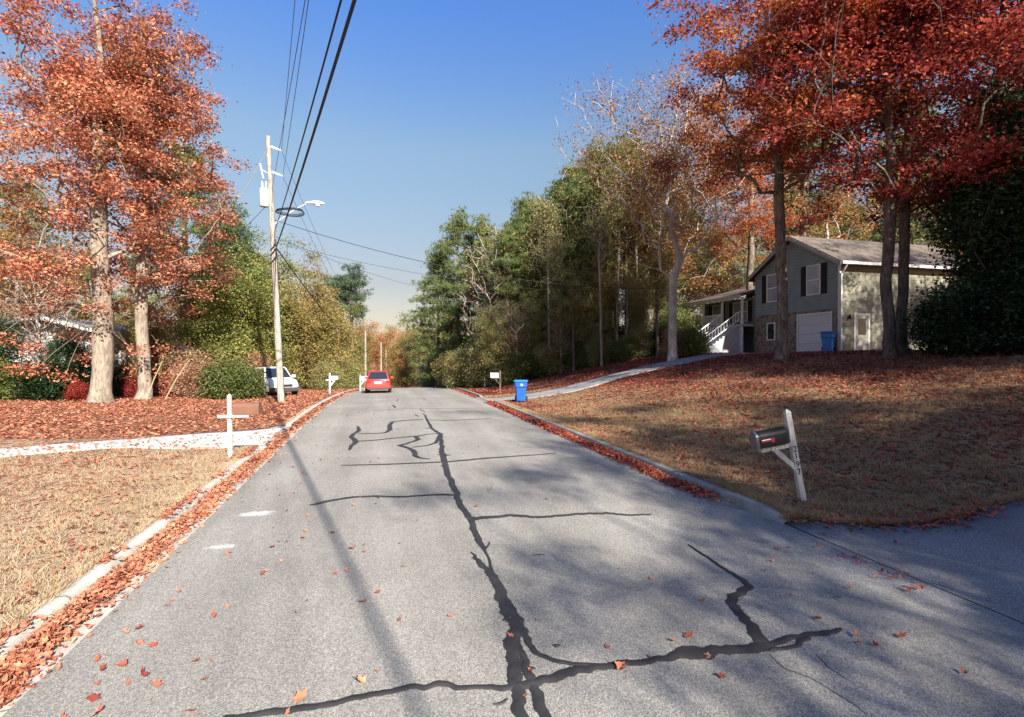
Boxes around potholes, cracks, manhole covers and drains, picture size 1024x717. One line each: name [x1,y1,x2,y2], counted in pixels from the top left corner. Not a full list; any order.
crack [769,654,866,714]
